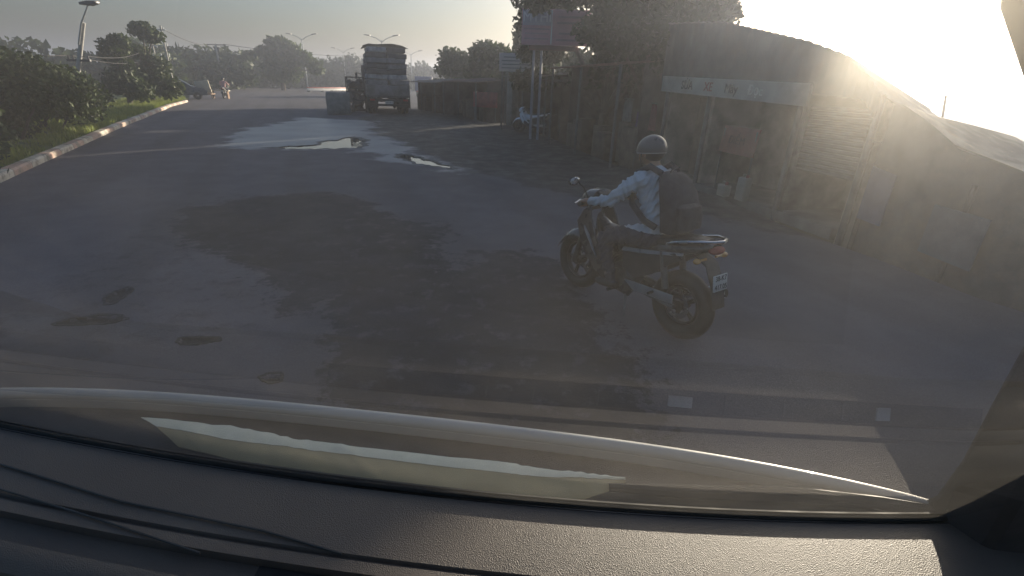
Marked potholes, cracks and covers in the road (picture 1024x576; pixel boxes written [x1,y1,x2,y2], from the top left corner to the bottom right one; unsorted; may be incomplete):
pothole [175,336,222,346]
pothole [51,313,130,326]
pothole [257,371,284,384]
pothole [102,286,134,305]
